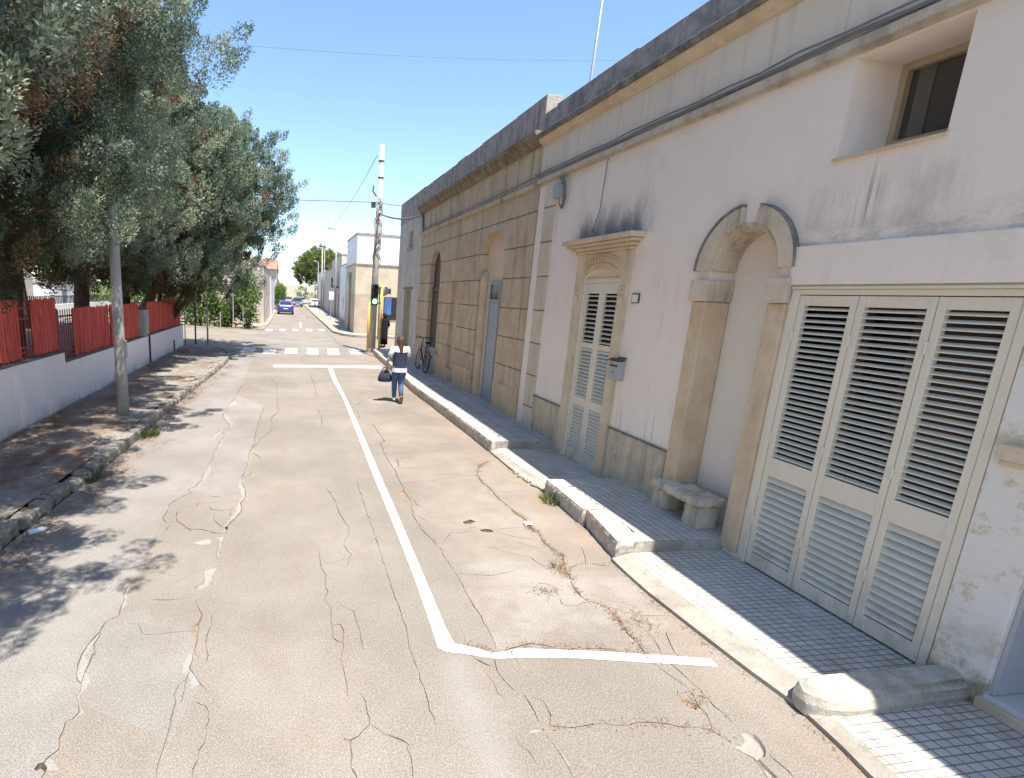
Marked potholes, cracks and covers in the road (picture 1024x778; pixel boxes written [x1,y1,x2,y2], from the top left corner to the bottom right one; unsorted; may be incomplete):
crack [132,596,212,778]
crack [162,375,323,533]
crack [396,411,792,778]
crack [41,584,130,778]
crack [319,488,413,778]
